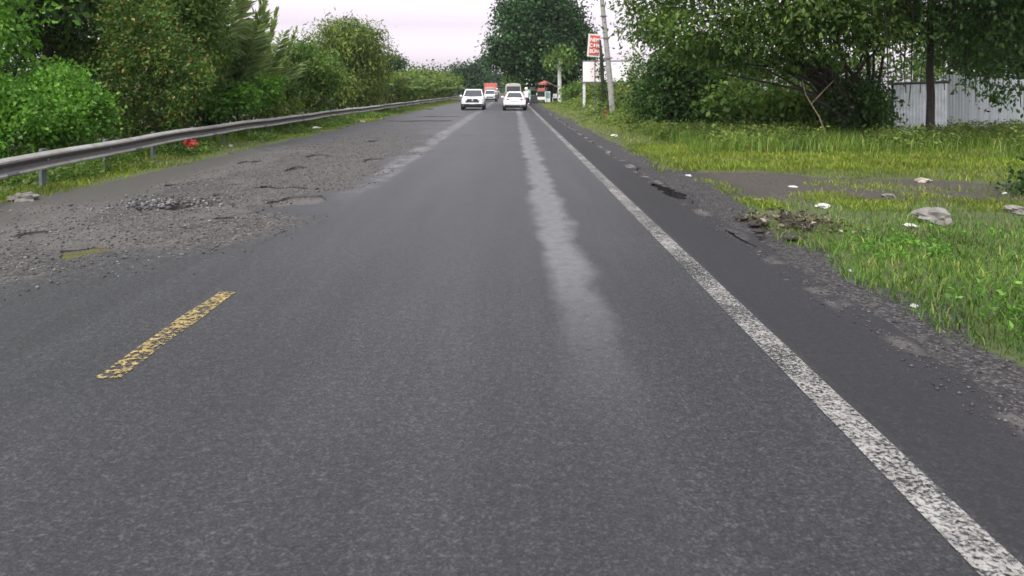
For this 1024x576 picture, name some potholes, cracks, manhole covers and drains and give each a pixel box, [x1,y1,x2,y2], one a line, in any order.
pothole [265,195,327,208]
pothole [14,231,50,239]
crack [726,230,756,247]
pothole [58,248,111,259]
